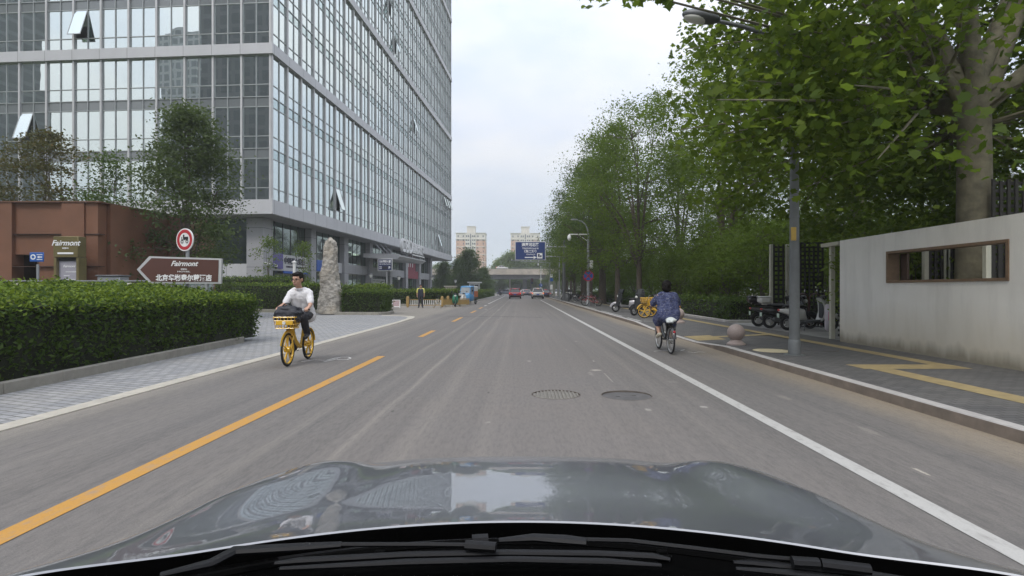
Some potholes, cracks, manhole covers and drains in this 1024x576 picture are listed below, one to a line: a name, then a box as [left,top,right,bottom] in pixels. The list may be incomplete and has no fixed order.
manhole cover [601,390,652,400]
